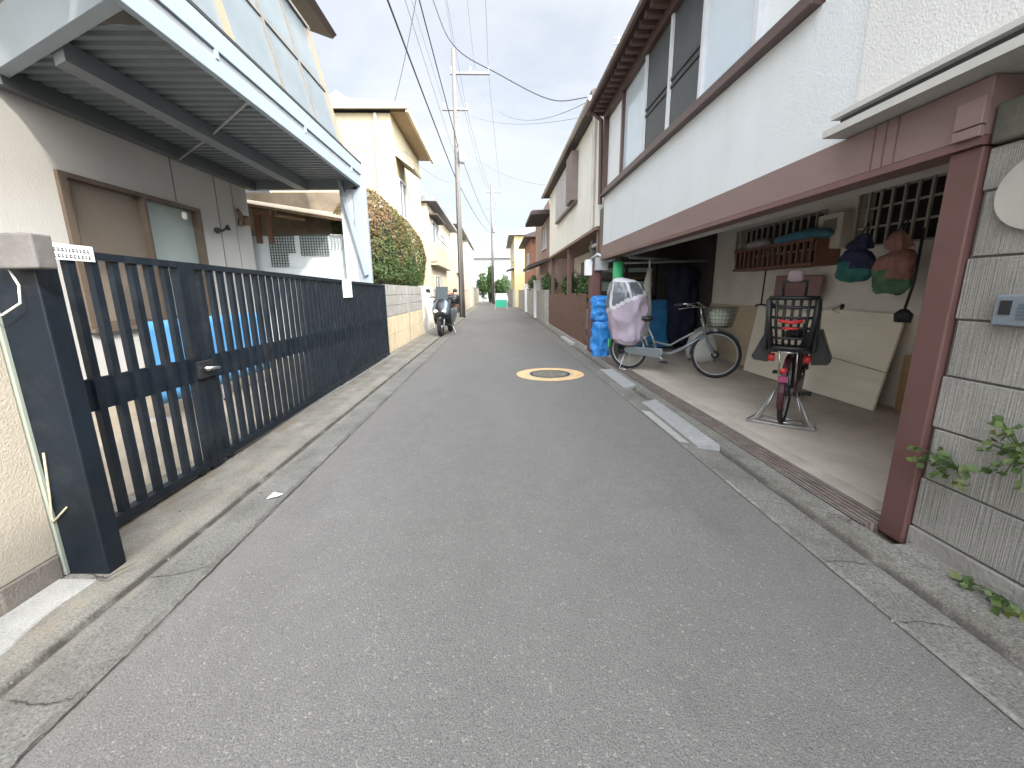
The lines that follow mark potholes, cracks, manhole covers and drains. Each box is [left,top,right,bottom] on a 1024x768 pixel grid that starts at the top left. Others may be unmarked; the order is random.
manhole cover [517,368,584,381]
